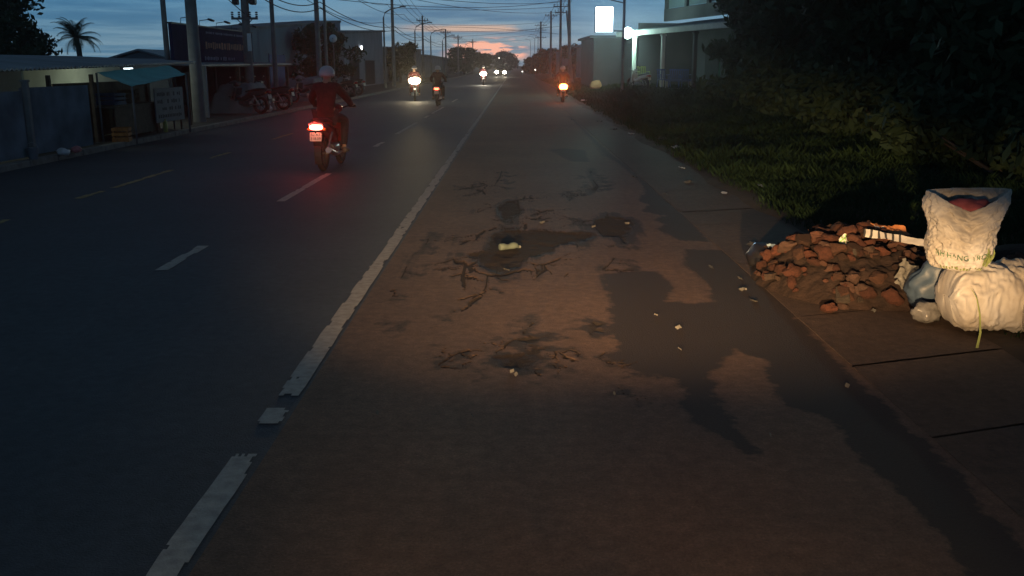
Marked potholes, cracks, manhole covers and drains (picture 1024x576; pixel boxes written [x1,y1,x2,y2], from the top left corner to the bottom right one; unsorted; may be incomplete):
pothole [459,229,601,276]
crack [601,244,636,274]
crack [435,319,650,402]
crack [389,170,617,312]
pothole [490,332,554,372]
